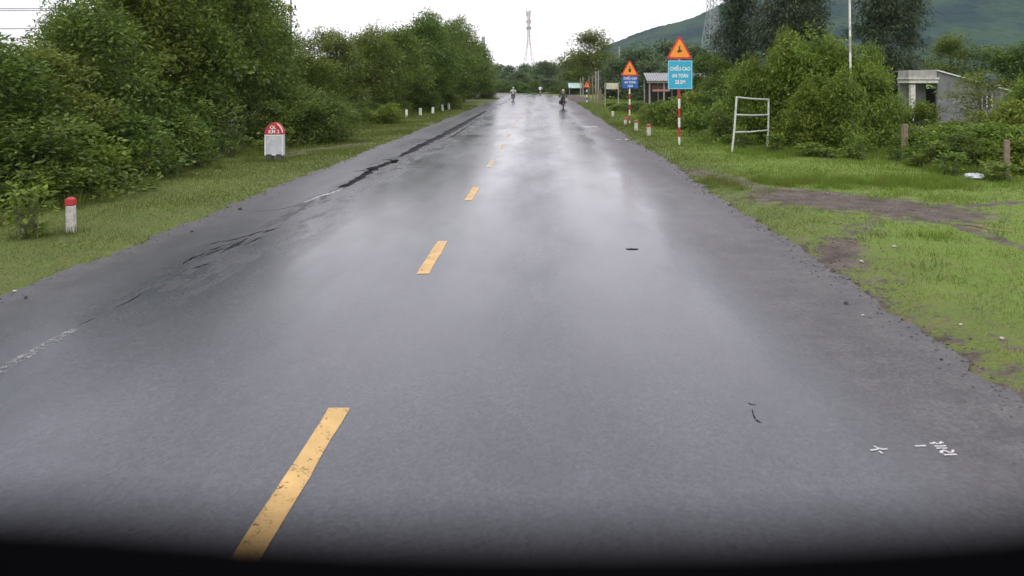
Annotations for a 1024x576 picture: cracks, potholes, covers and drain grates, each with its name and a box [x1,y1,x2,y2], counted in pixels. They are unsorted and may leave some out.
crack [338,111,486,188]
crack [182,203,303,269]
